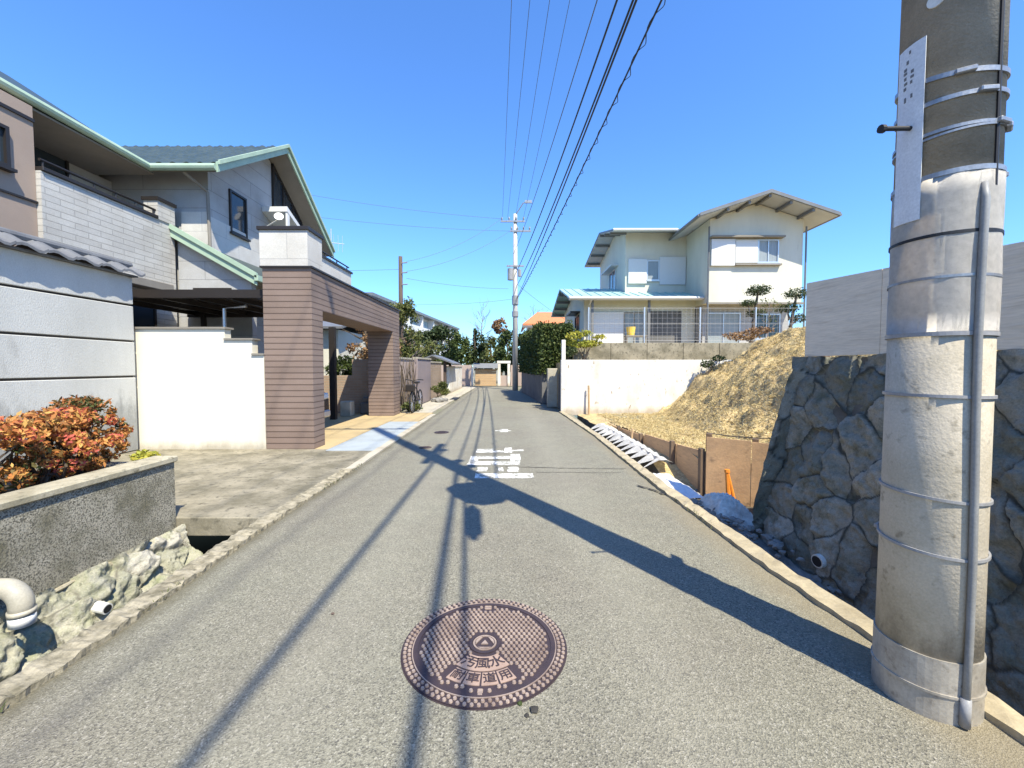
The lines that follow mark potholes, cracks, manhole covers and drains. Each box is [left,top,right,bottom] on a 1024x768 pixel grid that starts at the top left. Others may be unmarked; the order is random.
manhole cover [400,598,567,711]
